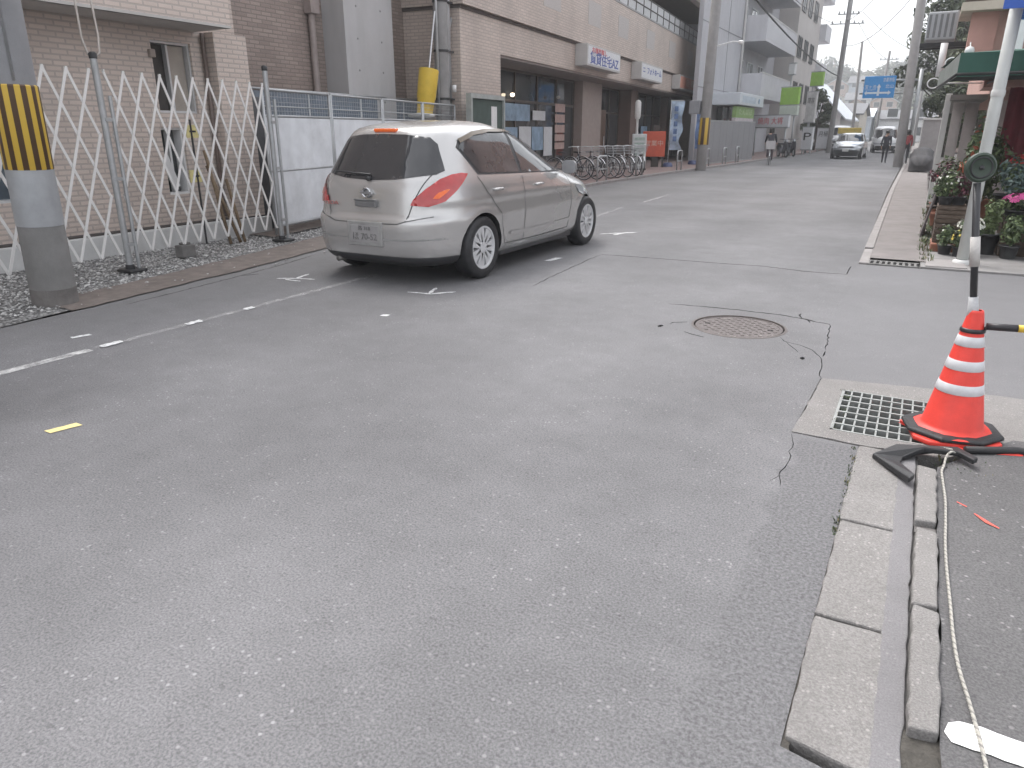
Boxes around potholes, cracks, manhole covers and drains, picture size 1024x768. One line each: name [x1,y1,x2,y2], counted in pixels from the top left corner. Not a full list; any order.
drain grate [866,260,919,269]
manhole cover [691,315,787,339]
crack [768,434,794,484]
drain grate [830,390,928,445]
